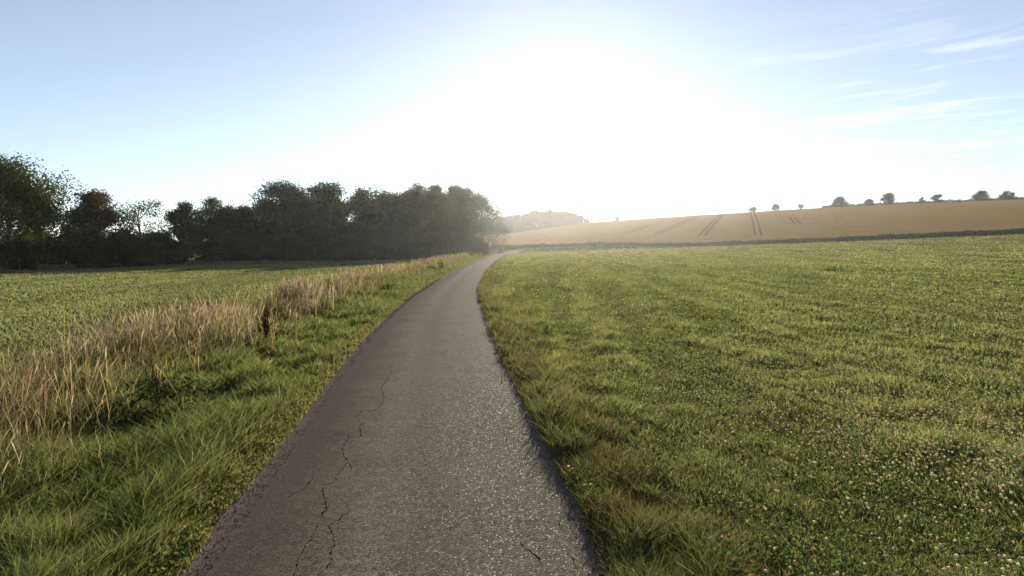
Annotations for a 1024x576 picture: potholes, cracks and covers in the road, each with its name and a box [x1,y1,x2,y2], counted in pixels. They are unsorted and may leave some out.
crack [290,378,388,576]
